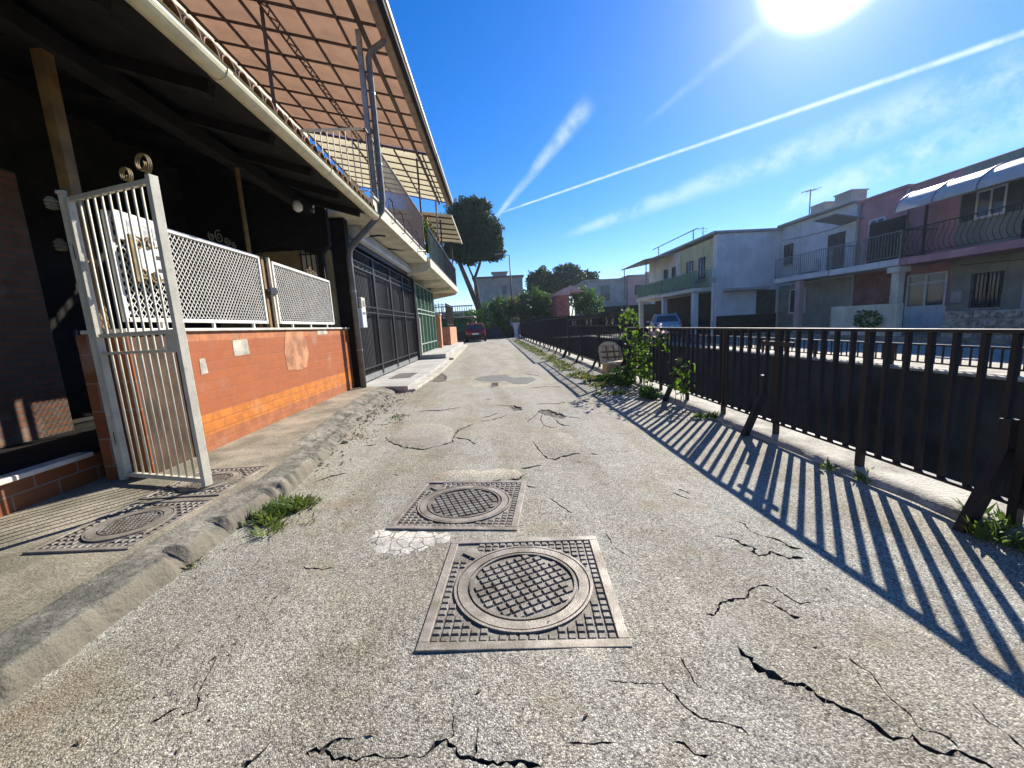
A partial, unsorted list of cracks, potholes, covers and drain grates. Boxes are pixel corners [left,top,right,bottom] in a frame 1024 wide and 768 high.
manhole cover [23,498,217,555]
crack [240,714,541,768]
crack [605,642,1024,768]
crack [716,522,833,559]
manhole cover [138,465,270,500]
manhole cover [415,536,633,653]
manhole cover [386,481,526,531]
pothole [537,409,567,419]
crack [385,405,507,450]
crack [150,659,216,724]
crack [707,584,810,619]
